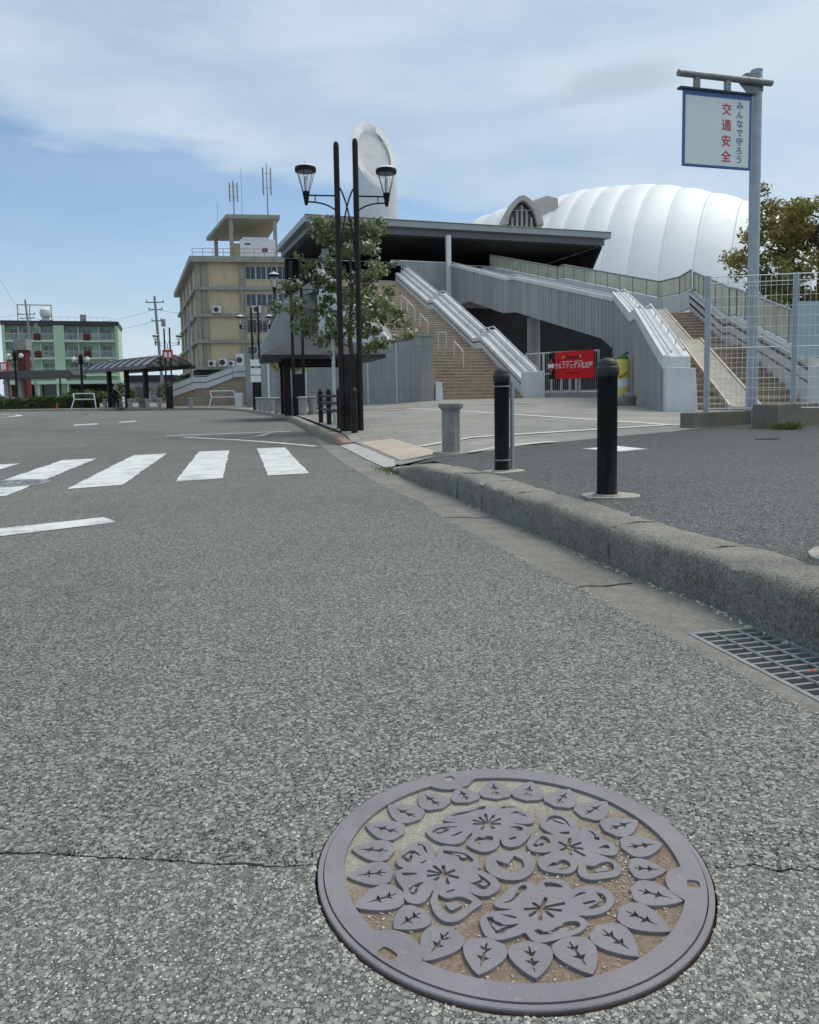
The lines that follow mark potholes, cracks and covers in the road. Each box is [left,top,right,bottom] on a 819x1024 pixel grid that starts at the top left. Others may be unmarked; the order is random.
drain grate [687,626,819,702]
manhole cover [317,769,716,1018]
